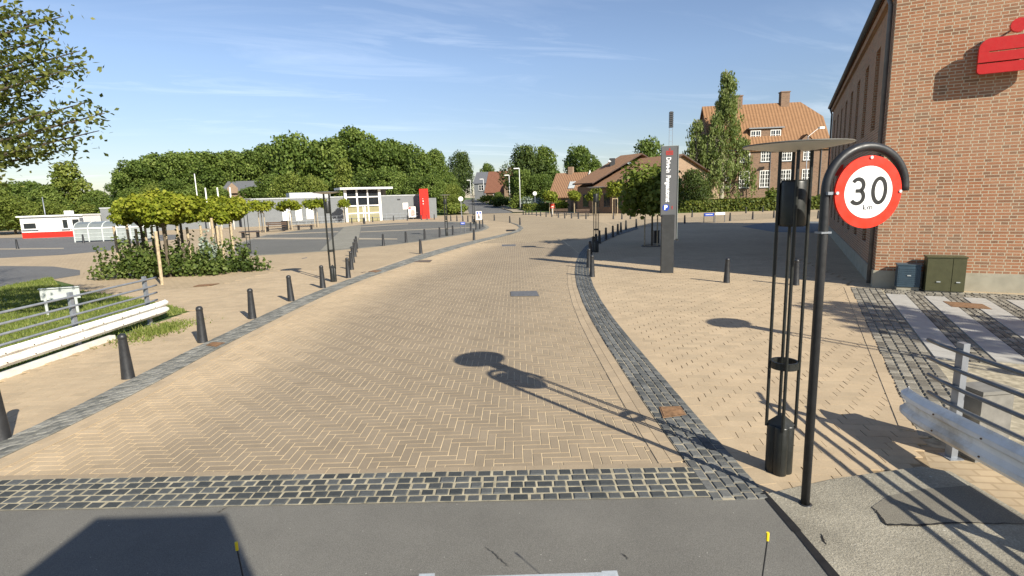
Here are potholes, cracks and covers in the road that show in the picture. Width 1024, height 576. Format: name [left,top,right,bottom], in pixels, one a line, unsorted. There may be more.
manhole cover [943,301,991,309]
